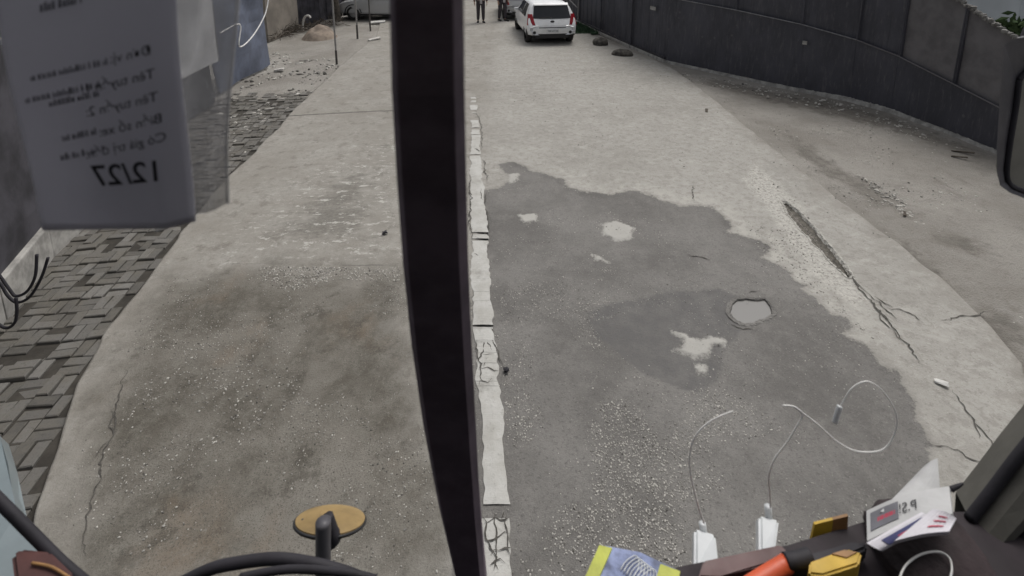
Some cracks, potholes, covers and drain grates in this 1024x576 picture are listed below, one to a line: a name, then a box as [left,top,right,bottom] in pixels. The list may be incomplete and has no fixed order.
crack [935,391,993,462]
crack [481,512,511,568]
pothole [726,296,777,327]
crack [476,326,503,385]
crack [780,200,919,363]
crack [82,370,128,555]
